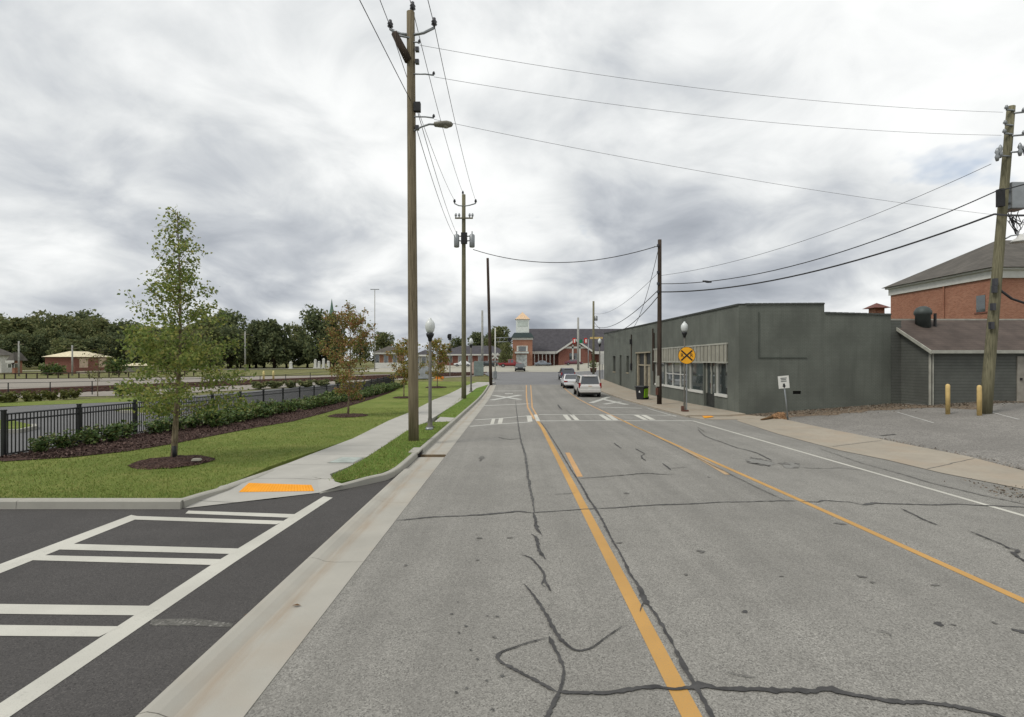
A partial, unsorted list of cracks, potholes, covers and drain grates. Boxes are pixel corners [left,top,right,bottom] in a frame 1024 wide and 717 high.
drain grate [409,447,446,457]
crack [971,531,1024,561]
crack [500,401,622,651]
crack [586,443,681,478]
